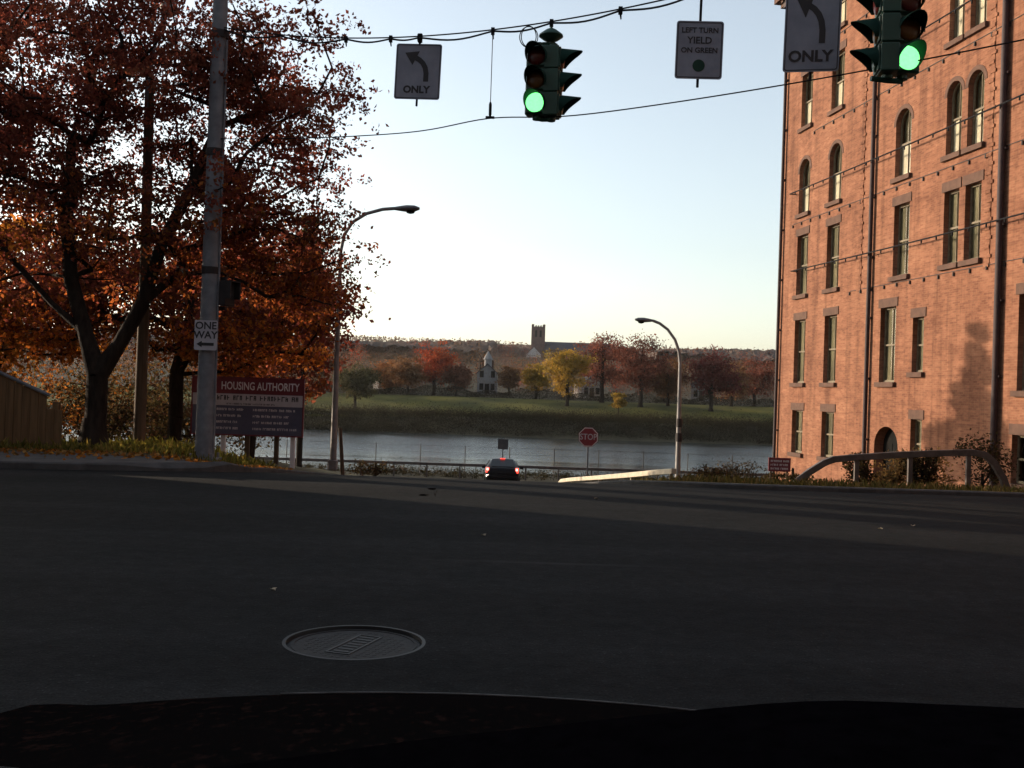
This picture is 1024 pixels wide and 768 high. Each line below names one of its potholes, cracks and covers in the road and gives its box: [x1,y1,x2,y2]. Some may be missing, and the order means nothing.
manhole cover [282,625,426,660]
